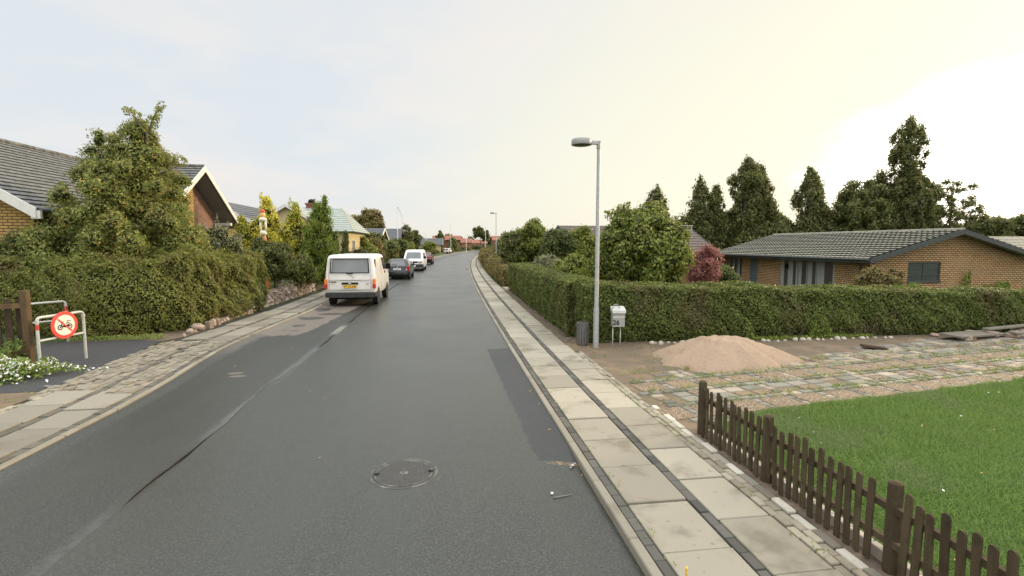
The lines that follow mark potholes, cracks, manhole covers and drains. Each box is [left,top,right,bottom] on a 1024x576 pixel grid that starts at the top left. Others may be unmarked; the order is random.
manhole cover [369,459,438,489]
